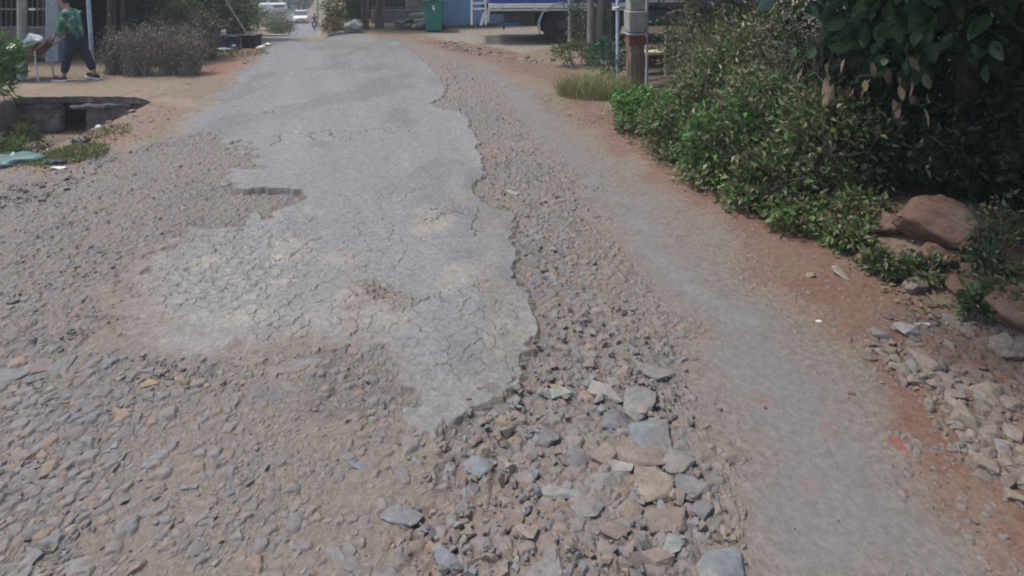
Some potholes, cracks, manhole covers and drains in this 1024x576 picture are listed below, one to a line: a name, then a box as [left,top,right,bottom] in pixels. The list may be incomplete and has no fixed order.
crack [141,182,528,388]
crack [266,126,416,145]
